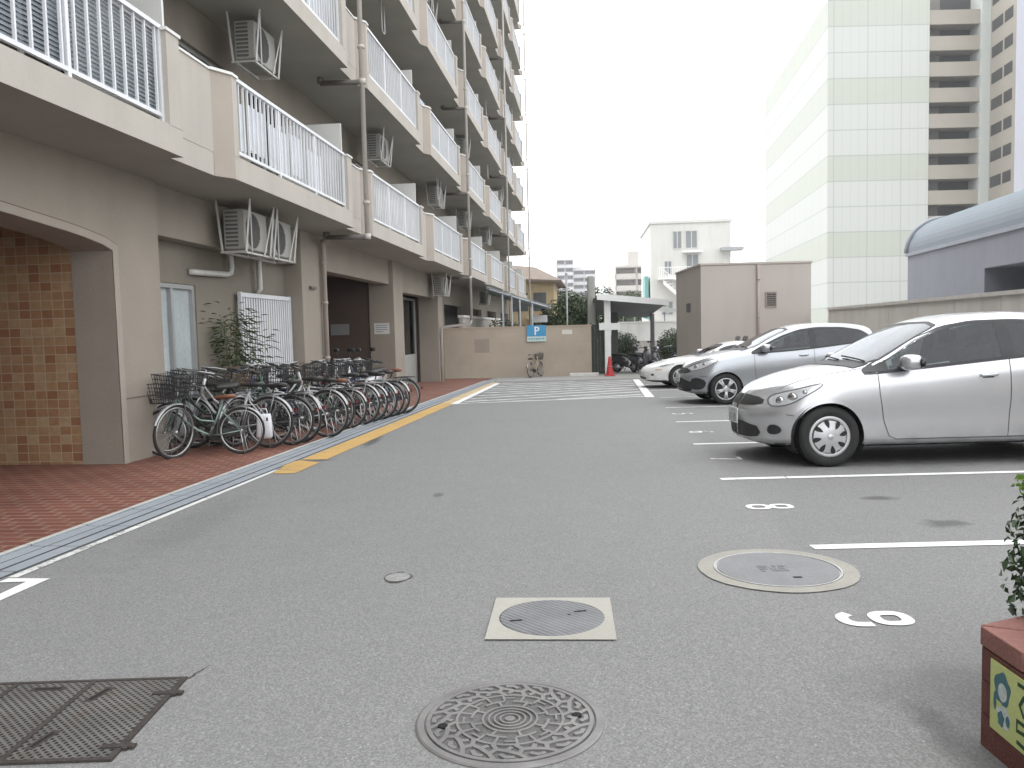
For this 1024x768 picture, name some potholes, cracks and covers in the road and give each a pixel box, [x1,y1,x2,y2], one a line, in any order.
manhole cover [698,549,861,593]
manhole cover [485,597,617,640]
manhole cover [415,680,605,768]
drain grate [0,676,188,766]
utility cover [384,572,413,583]
